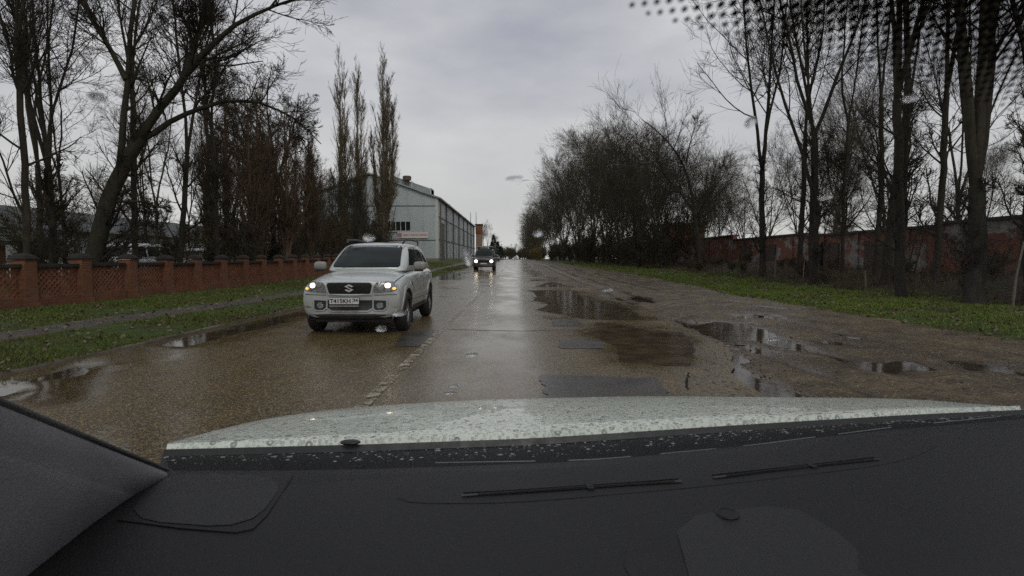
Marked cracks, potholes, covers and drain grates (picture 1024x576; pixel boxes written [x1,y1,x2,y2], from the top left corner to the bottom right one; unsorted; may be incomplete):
pothole [533,290,647,320]
